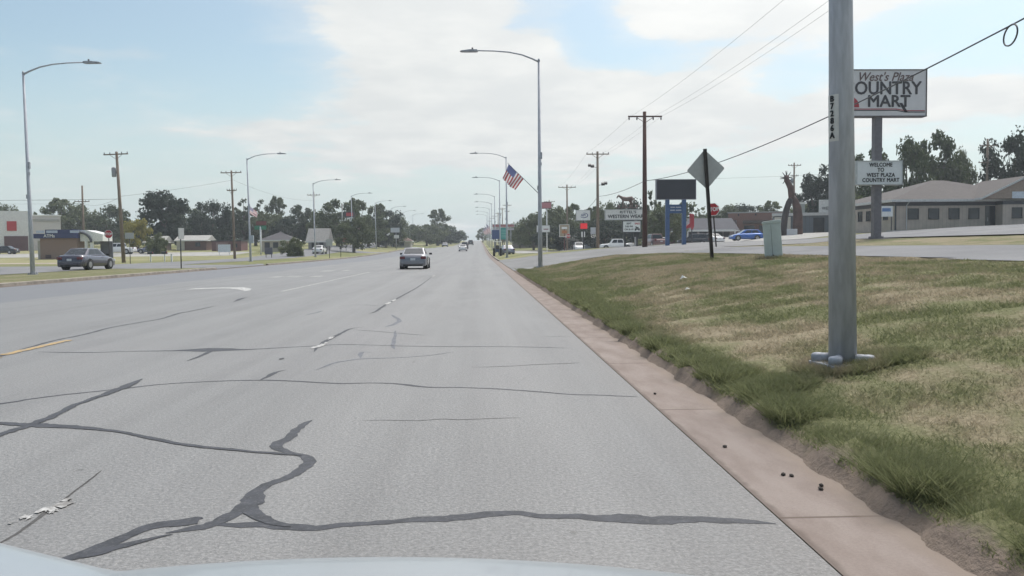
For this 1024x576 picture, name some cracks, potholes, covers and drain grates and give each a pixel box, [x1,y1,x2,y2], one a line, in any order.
crack [0,352,776,560]
